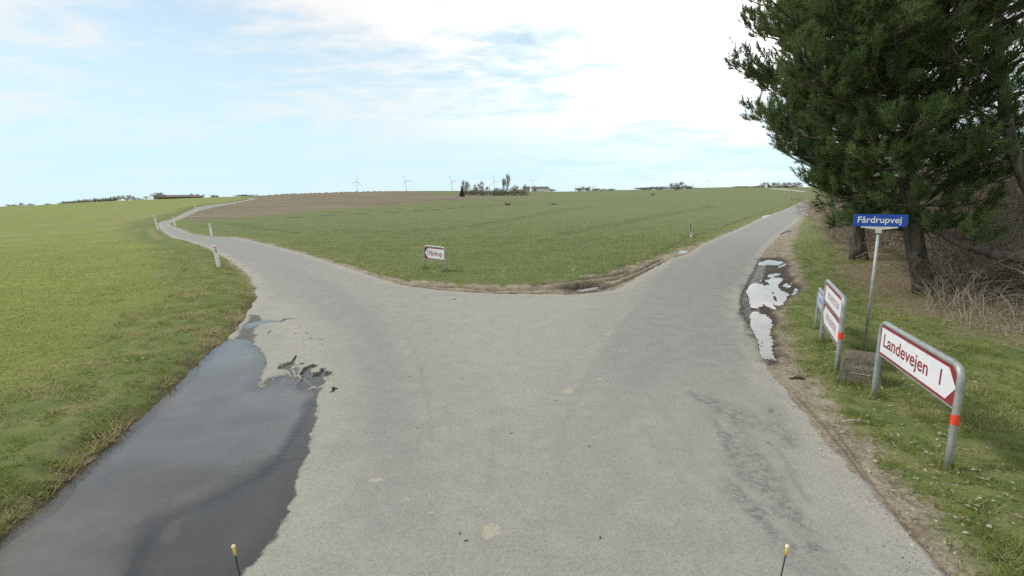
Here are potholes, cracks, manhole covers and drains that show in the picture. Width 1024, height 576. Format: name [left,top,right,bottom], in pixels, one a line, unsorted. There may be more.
pothole [739,261,769,364]
